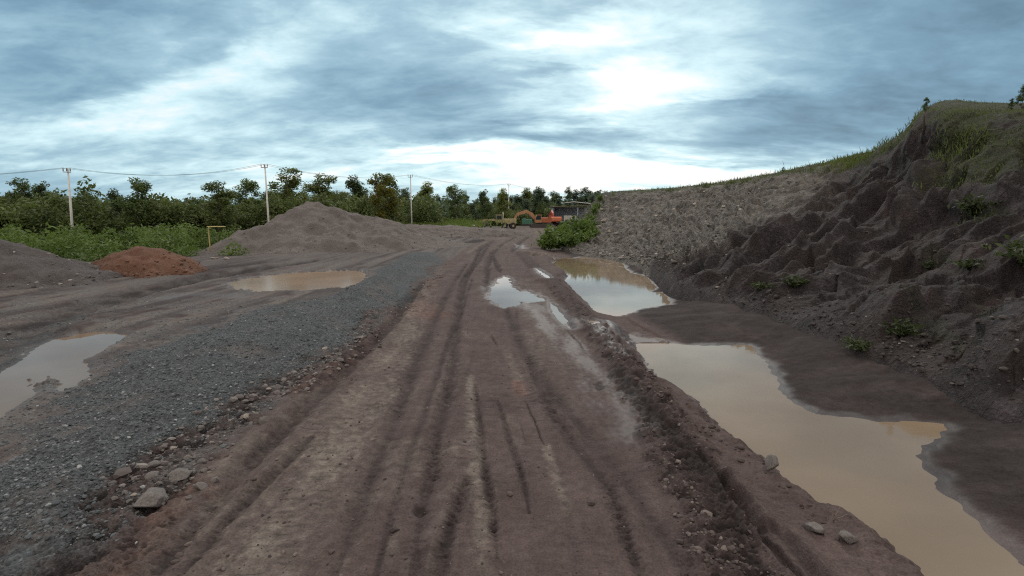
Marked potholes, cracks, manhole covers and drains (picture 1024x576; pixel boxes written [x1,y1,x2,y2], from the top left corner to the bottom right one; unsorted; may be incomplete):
pothole [485,275,549,308]
pothole [0,328,132,418]
pothole [223,268,371,292]
